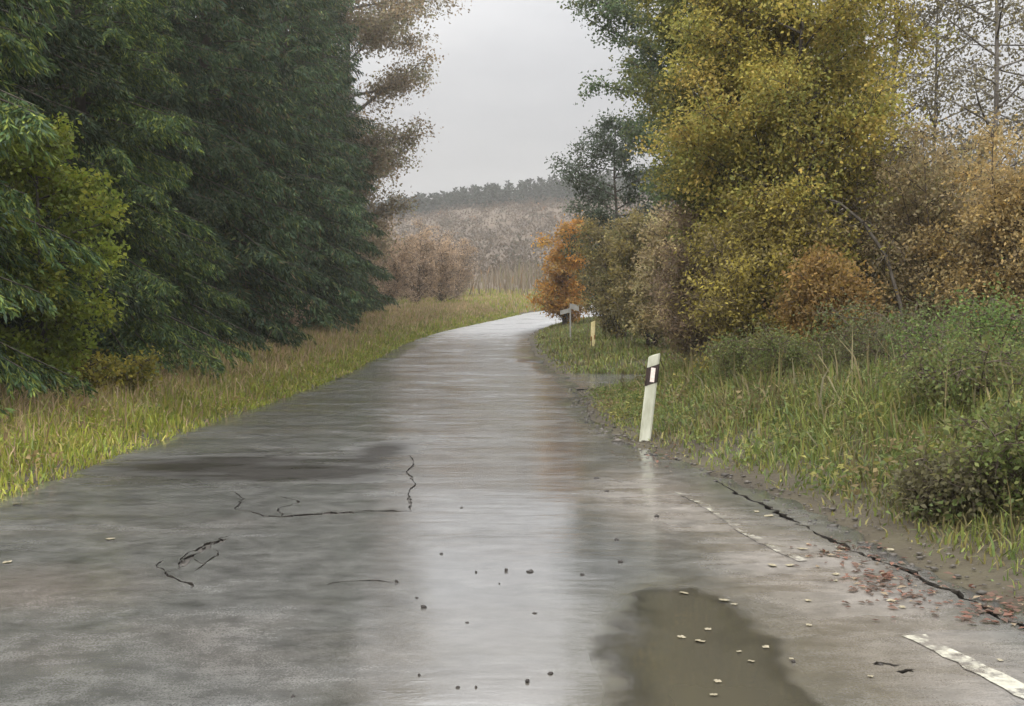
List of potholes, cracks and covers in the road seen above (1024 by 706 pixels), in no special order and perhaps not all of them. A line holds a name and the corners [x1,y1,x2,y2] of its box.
crack [873,661,914,674]
crack [156,535,231,589]
crack [233,455,416,517]
crack [717,481,1024,629]
